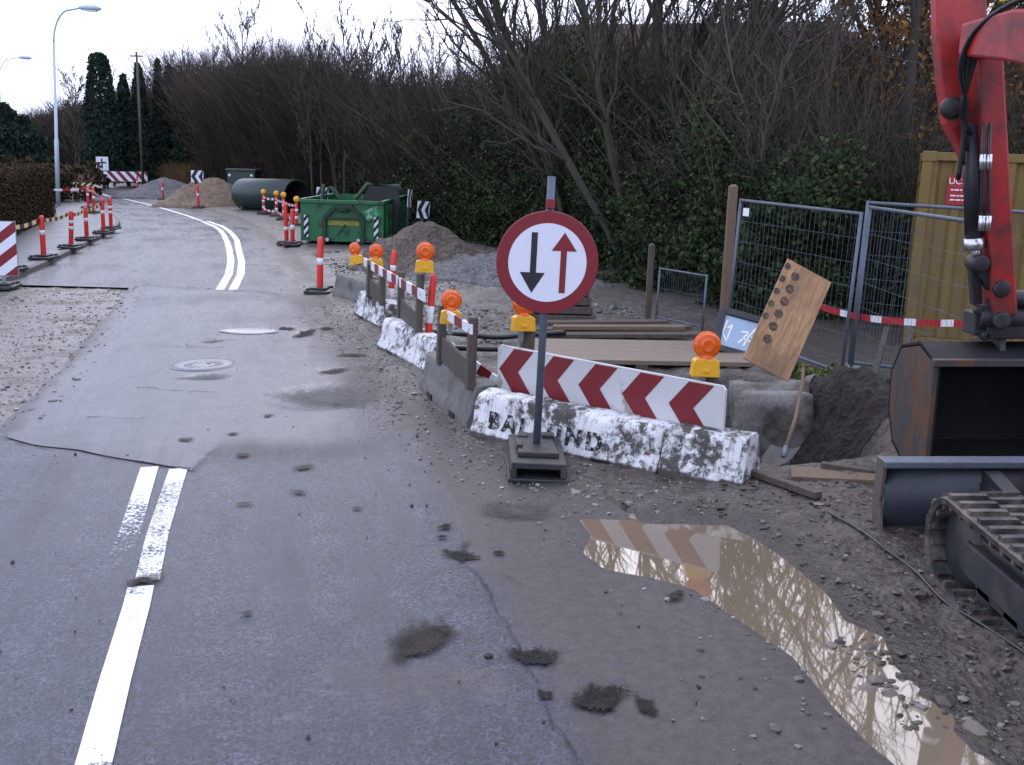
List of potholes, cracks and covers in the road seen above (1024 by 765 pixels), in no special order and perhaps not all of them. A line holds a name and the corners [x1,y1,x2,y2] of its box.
manhole cover [168,358,238,371]
crack [468,565,577,754]
pothole [563,682,634,715]
pothole [632,695,660,715]
